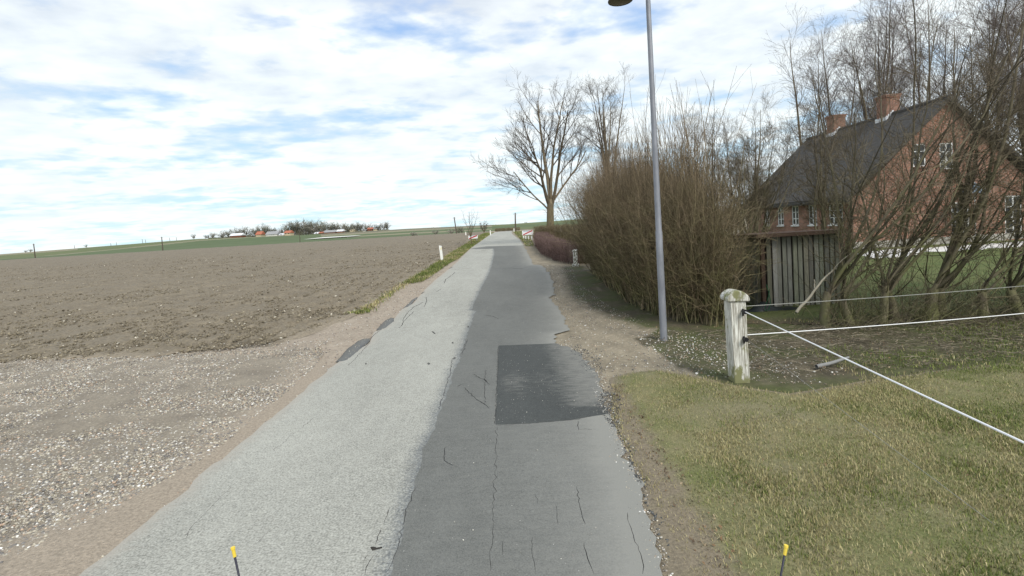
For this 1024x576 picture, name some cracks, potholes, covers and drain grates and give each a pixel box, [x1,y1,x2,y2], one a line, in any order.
crack [489,430,503,573]
crack [444,339,489,407]
